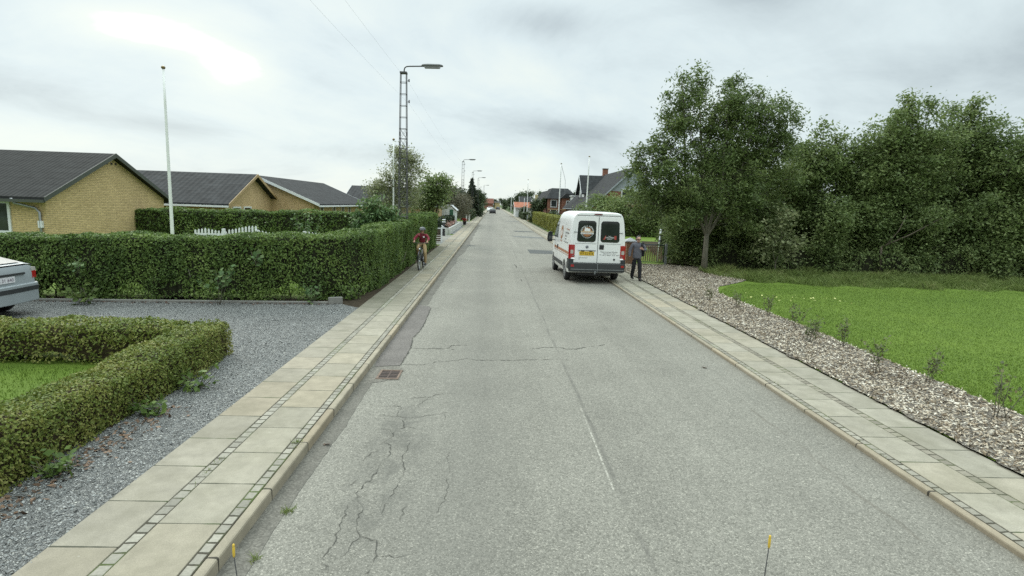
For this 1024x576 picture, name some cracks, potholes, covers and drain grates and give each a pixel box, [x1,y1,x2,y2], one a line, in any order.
drain grate [375,369,403,380]
crack [321,393,447,575]
crack [406,344,605,365]
